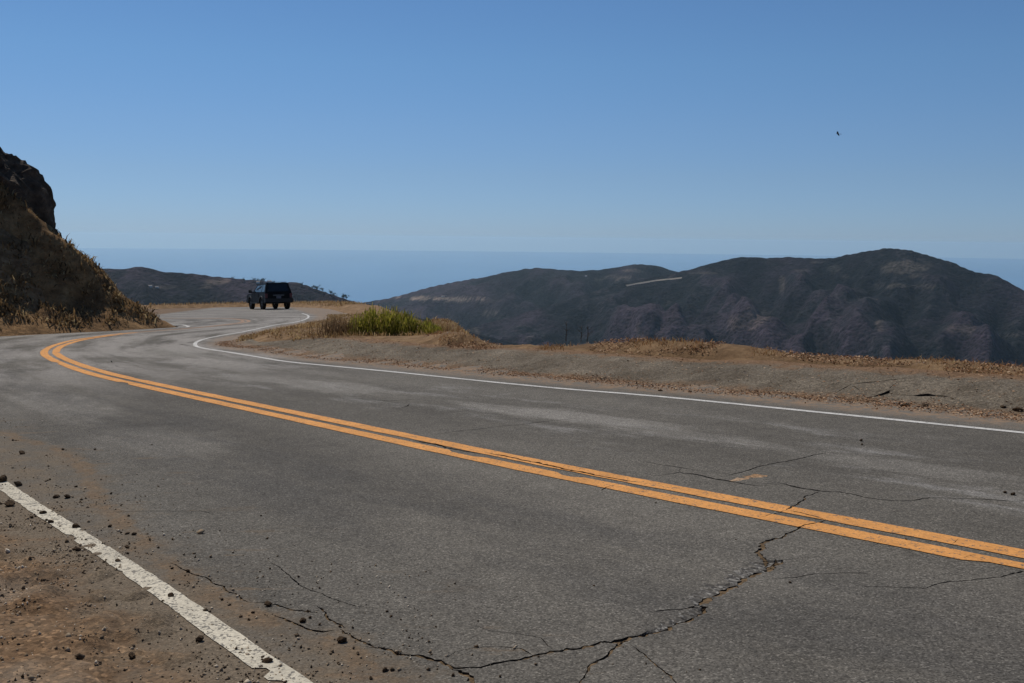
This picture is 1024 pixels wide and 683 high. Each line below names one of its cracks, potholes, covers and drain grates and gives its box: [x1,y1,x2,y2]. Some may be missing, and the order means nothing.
crack [415,418,626,491]
crack [170,452,1024,683]
crack [834,378,954,398]
